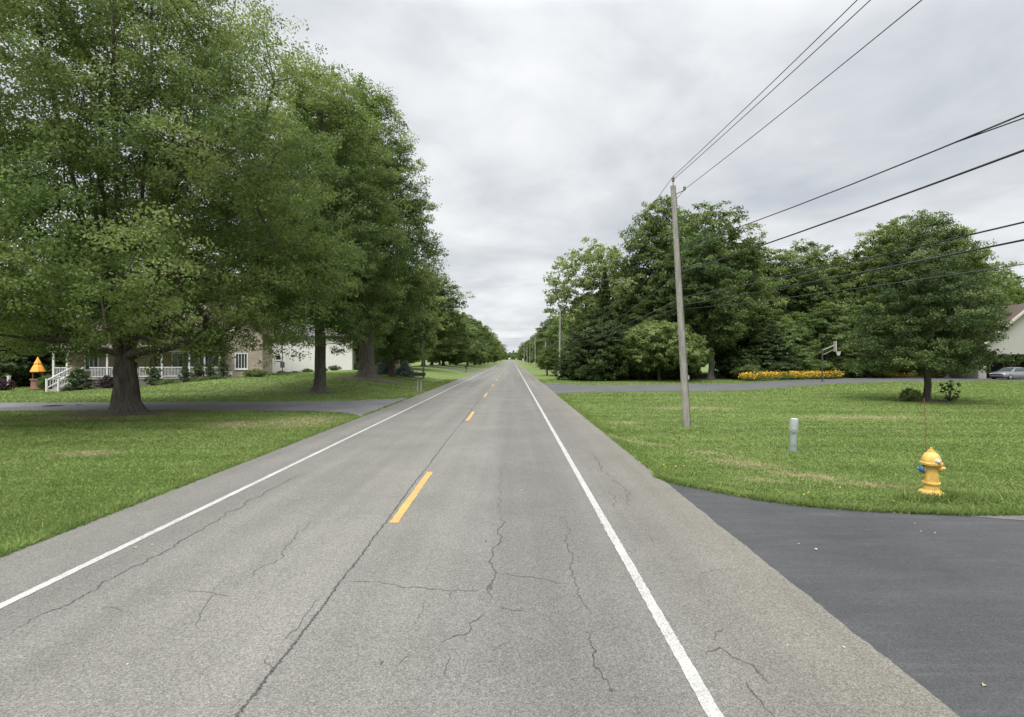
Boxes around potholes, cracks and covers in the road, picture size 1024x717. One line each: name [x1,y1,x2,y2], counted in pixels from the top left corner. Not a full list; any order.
crack [707,628,774,716]
crack [10,477,294,634]
crack [360,449,555,639]
crack [587,632,610,683]
